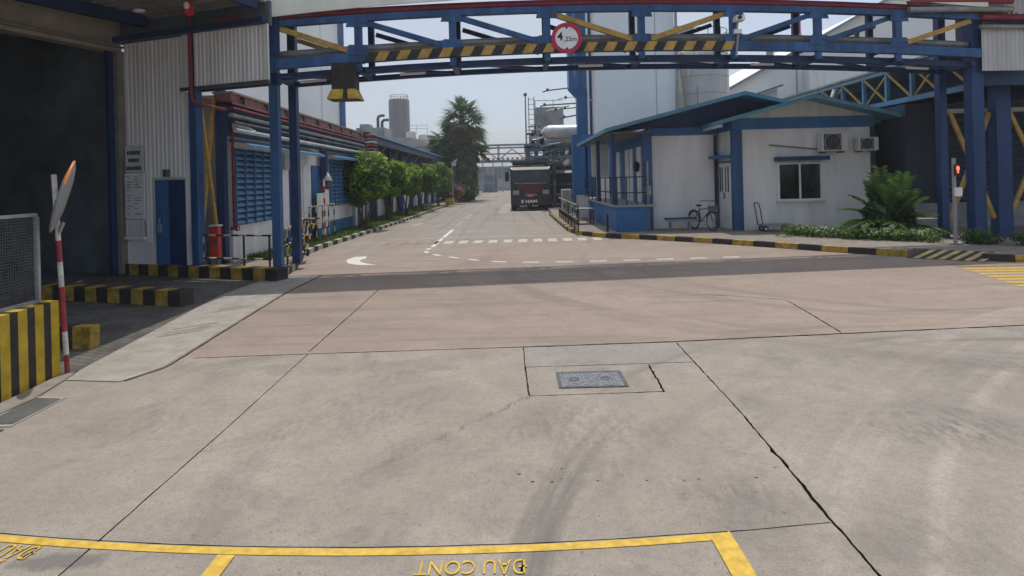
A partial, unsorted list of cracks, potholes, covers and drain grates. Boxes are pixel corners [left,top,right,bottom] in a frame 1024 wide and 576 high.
manhole cover [556,370,629,389]
crack [677,343,882,576]
